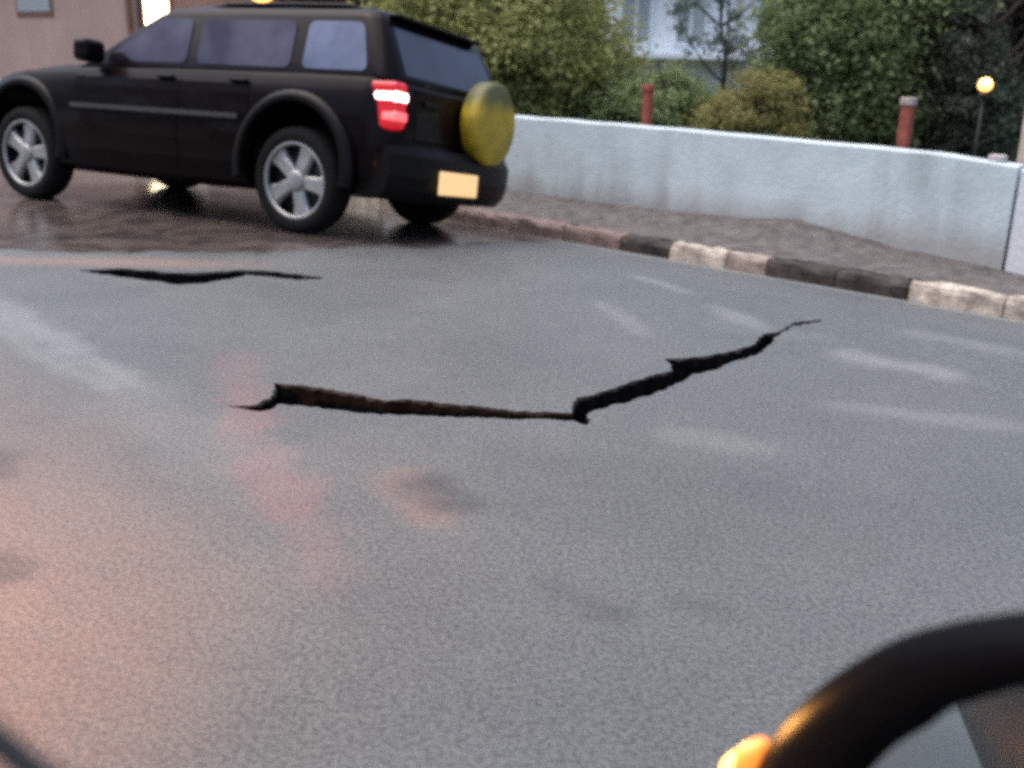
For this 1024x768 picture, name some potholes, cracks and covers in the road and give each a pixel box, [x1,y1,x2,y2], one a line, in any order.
crack [79,268,323,285]
crack [226,320,822,425]
